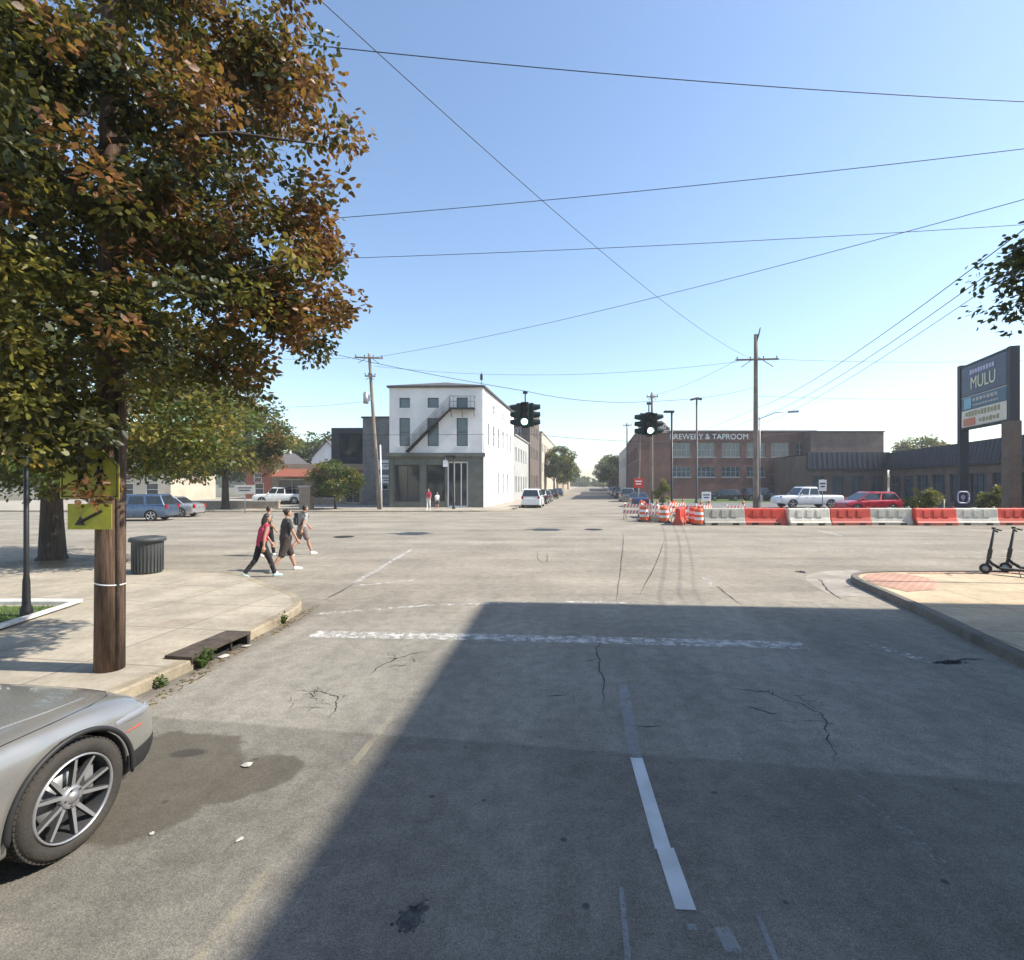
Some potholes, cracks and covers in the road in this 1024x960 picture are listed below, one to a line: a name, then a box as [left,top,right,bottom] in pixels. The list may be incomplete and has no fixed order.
crack [289,688,348,715]
crack [741,686,837,760]
crack [589,634,605,702]
pothole [390,898,427,935]
drain grate [164,630,251,670]
